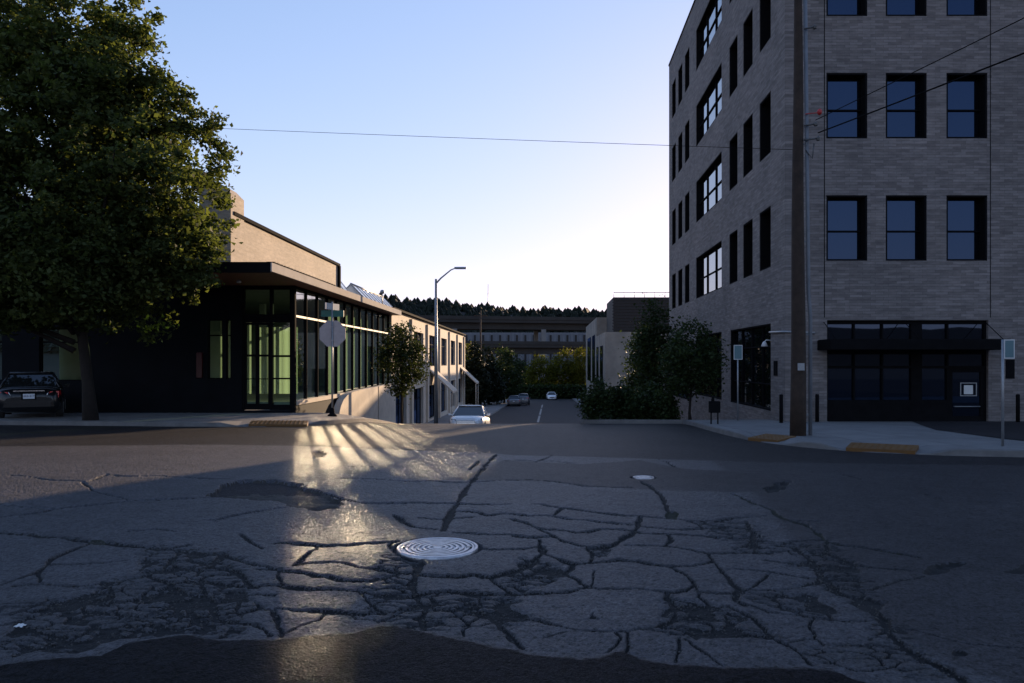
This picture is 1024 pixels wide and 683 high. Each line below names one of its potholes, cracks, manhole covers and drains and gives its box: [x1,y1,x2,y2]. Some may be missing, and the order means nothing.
pothole [763,482,792,493]
pothole [205,480,344,511]
crack [0,461,994,683]
pothole [923,562,967,575]
manhole cover [397,537,478,563]
